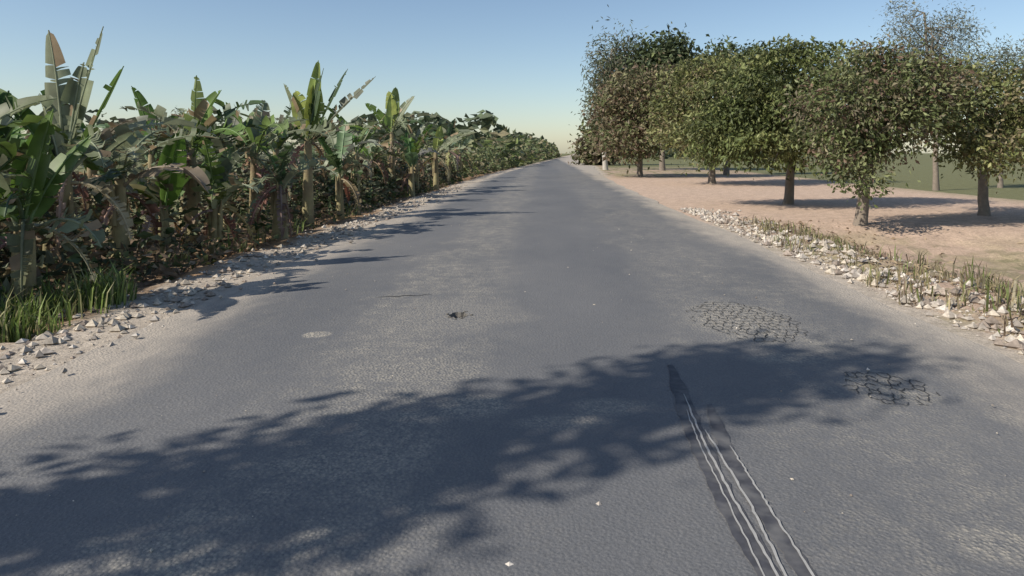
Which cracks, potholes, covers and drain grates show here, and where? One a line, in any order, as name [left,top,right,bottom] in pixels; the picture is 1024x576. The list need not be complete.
pothole [446,311,473,319]
